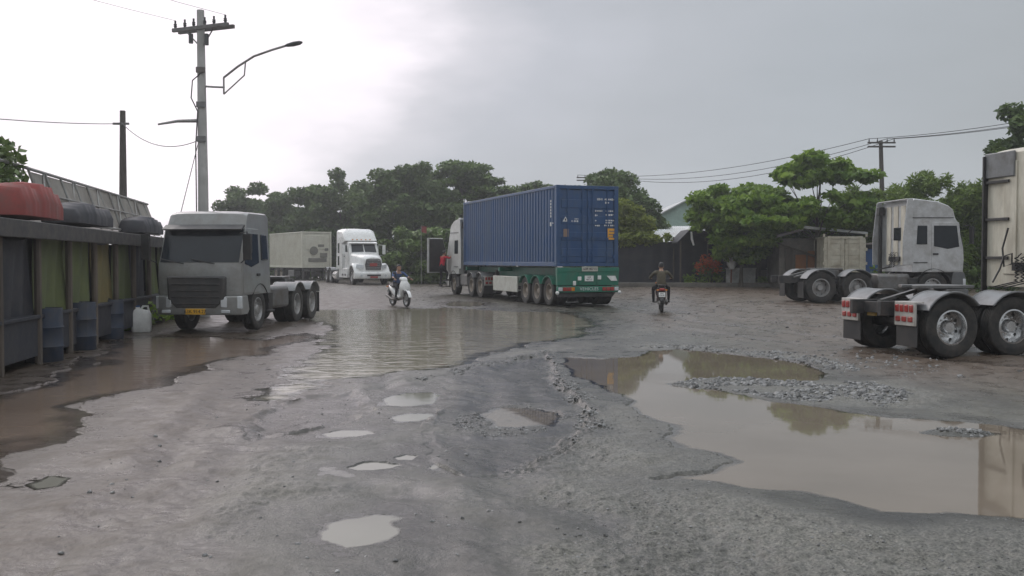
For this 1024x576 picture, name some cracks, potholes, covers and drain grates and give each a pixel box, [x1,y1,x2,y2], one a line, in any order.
pothole [24,475,74,490]
pothole [0,332,324,483]
pothole [239,390,377,444]
pothole [390,411,438,422]
pothole [553,348,1024,519]
pothole [420,350,607,478]
pothole [346,461,403,470]
pothole [382,392,445,407]
pothole [315,513,405,549]
pothole [234,306,604,402]
